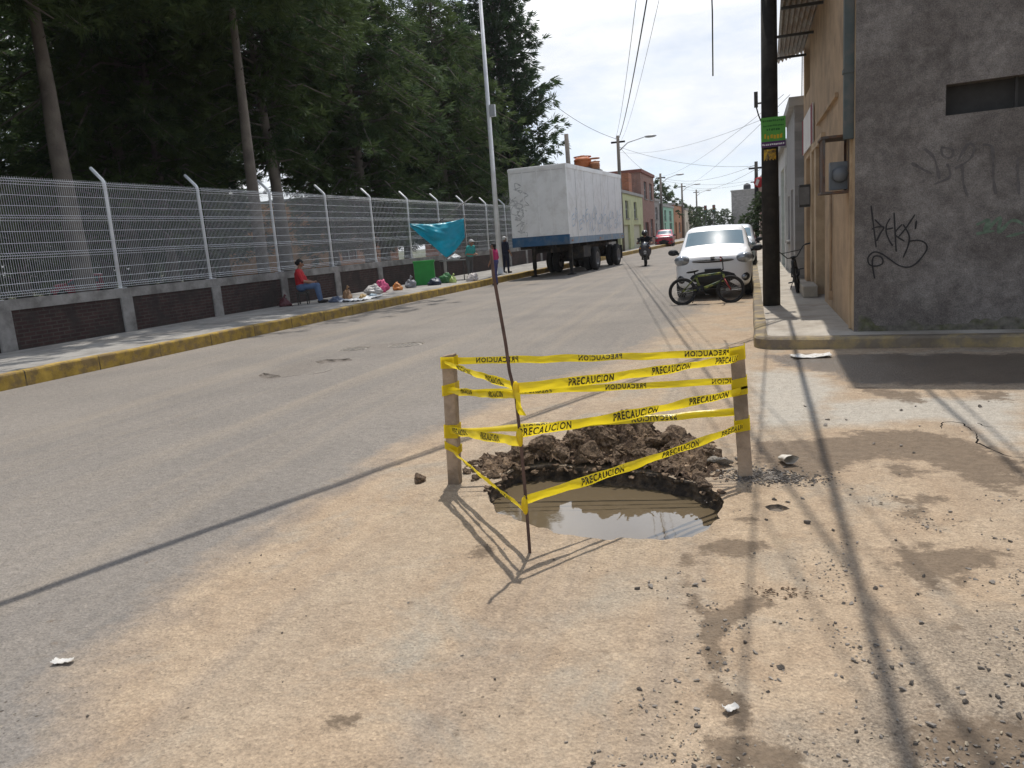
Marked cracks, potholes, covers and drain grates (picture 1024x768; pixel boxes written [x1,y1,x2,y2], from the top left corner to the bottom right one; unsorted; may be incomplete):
pothole [765,504,789,512]
pothole [487,465,724,519]
crack [940,421,1022,458]
